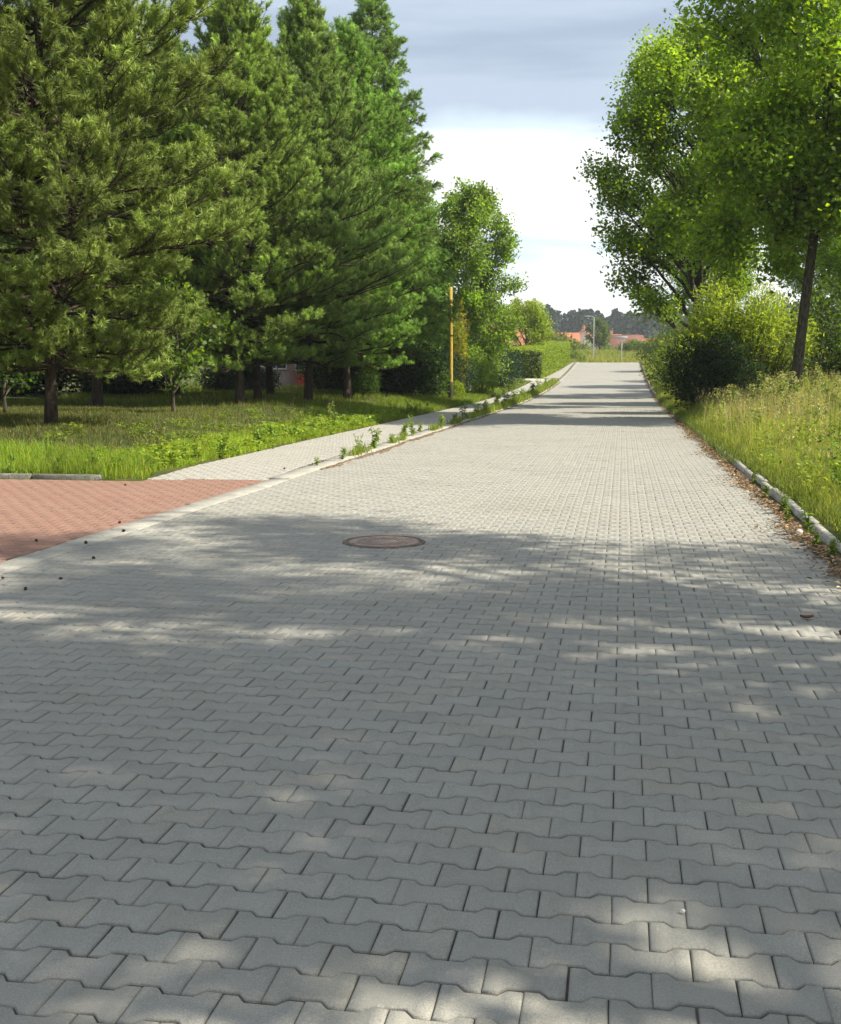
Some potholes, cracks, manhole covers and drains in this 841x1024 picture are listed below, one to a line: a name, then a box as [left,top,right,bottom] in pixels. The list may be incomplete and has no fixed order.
manhole cover [343,535,425,549]
